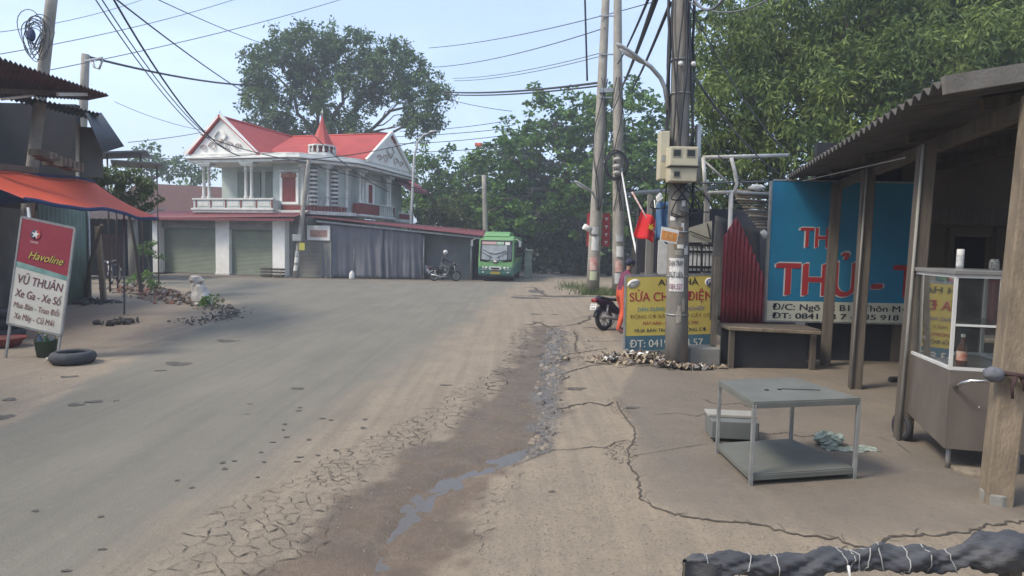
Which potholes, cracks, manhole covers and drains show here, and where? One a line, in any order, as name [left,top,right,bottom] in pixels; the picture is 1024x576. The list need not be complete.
crack [473,397,1024,553]
crack [149,316,618,576]
